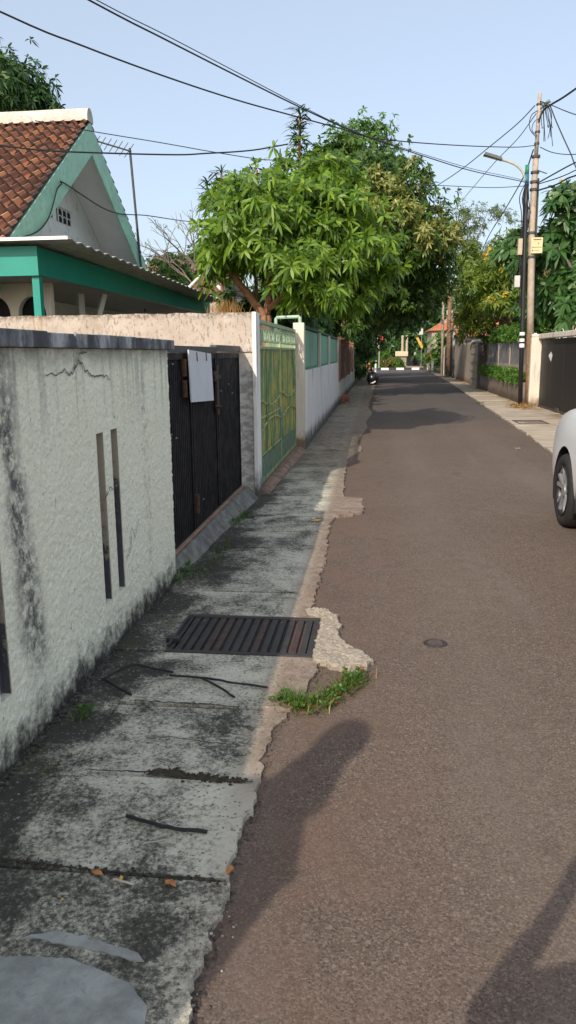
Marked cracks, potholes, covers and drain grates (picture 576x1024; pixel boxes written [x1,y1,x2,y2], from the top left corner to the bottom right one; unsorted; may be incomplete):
manhole cover [423,639,448,648]
drain grate [164,614,321,658]
